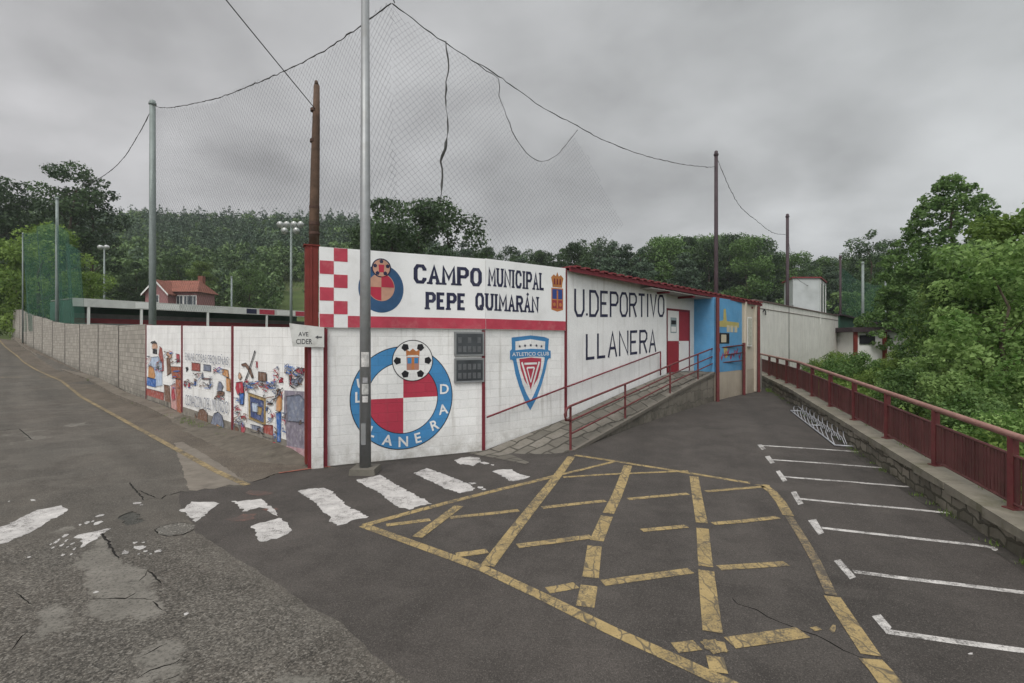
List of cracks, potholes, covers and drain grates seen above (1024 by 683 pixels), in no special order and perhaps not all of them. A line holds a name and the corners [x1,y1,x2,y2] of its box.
crack [732,598,889,664]
crack [96,570,162,610]
crack [129,483,184,501]
crack [138,644,181,680]
pothole [118,511,145,526]
crack [101,533,119,558]
